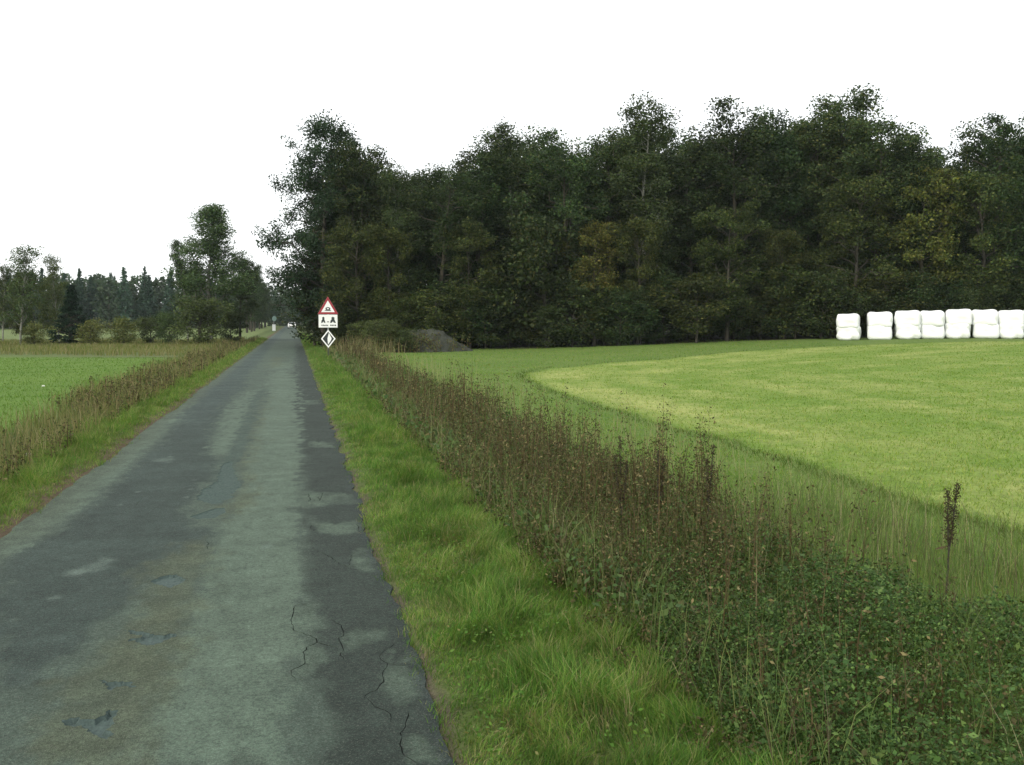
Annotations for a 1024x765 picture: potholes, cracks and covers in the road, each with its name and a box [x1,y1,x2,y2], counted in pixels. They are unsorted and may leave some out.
pothole [125,630,177,646]
crack [291,604,344,679]
pothole [101,680,136,690]
pothole [62,710,118,739]
pothole [151,574,186,588]
